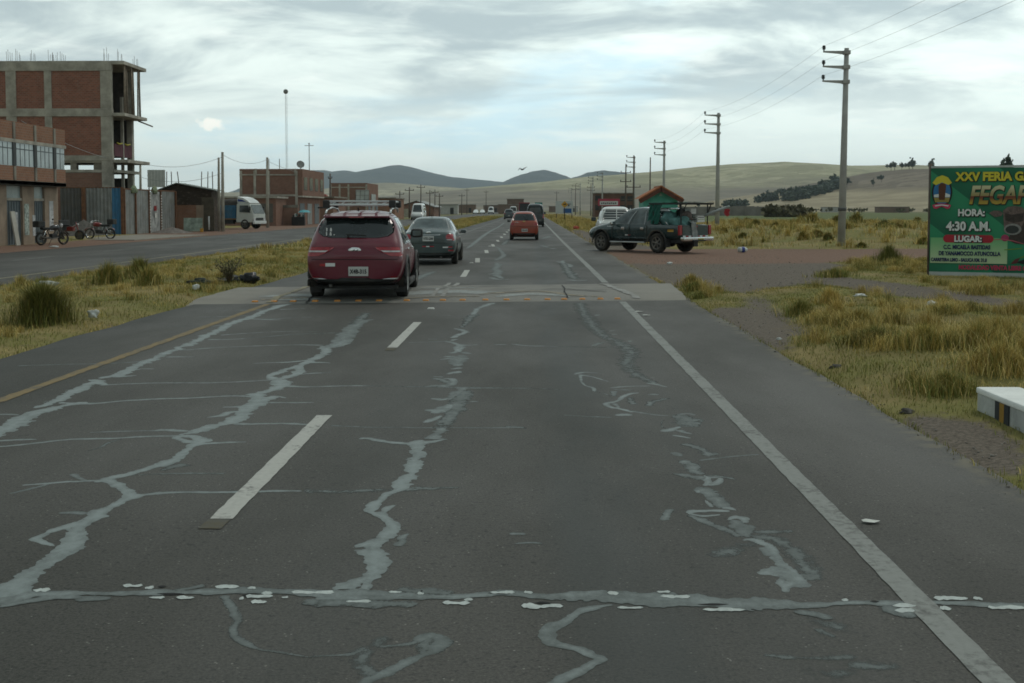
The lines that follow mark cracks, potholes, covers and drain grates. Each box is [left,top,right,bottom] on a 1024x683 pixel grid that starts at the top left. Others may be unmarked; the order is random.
crack [219,595,312,658]
